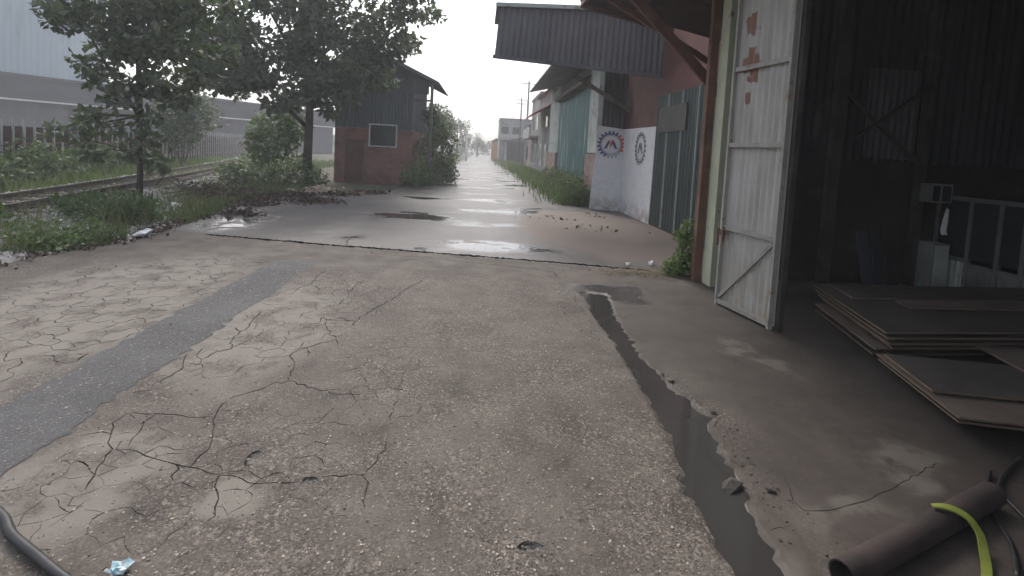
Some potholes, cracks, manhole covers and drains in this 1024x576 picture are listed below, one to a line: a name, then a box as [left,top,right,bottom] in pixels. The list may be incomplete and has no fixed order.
crack [0,257,265,392]
crack [133,272,433,425]
crack [769,463,938,531]
pothole [582,290,792,576]
crack [0,401,387,561]
